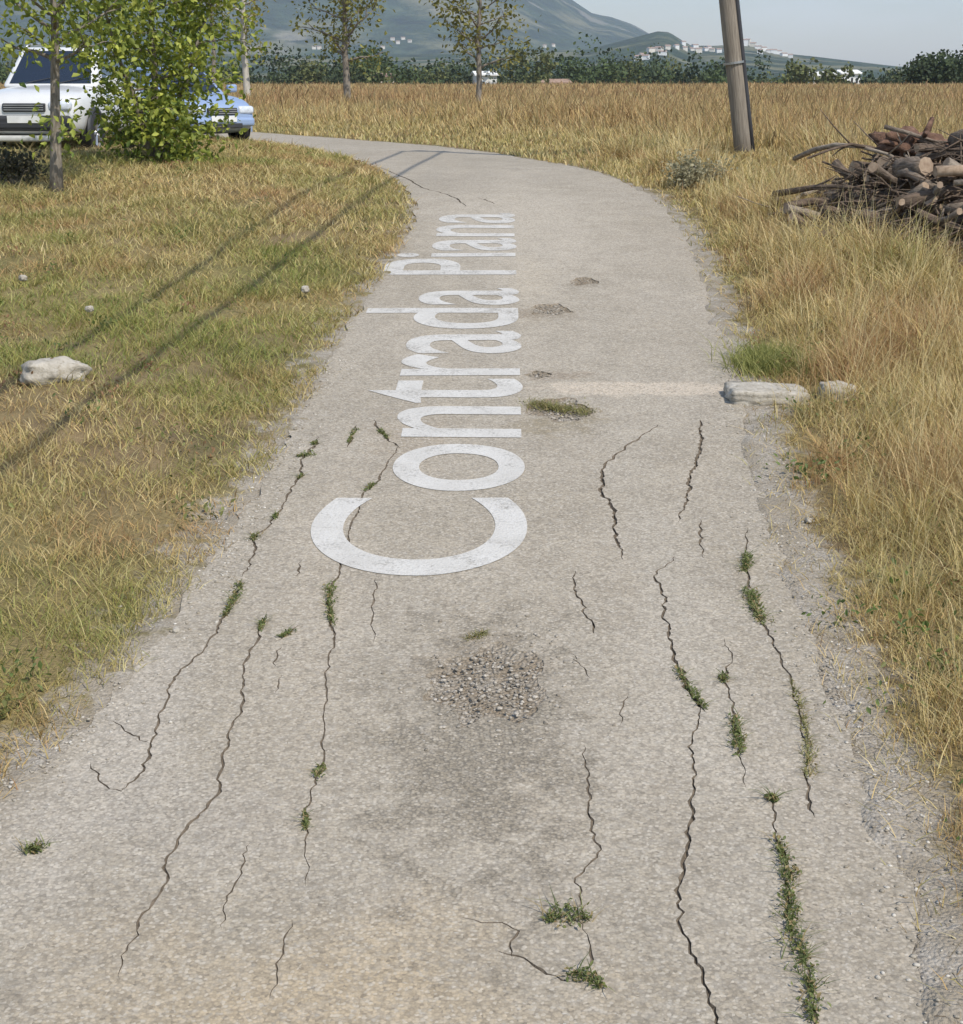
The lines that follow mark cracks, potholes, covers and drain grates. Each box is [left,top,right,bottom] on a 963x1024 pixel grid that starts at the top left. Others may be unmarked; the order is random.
pothole [570,277,599,286]
pothole [525,397,593,422]
pothole [528,303,574,315]
crack [572,425,746,1024]
crack [380,167,466,206]
crack [90,437,319,994]
crack [743,530,815,817]
crack [303,420,399,887]
crack [463,745,602,982]
crack [771,793,818,1024]
